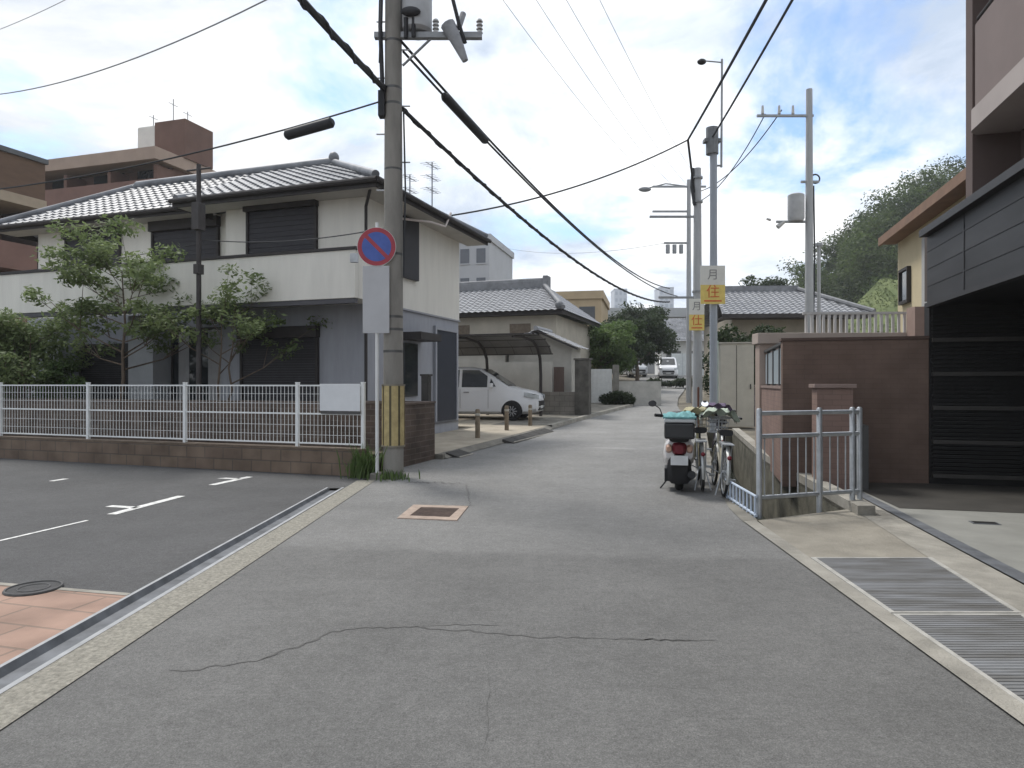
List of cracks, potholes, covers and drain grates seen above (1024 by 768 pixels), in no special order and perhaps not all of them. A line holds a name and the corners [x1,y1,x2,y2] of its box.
drain grate [892,613,1024,704]
drain grate [810,557,1022,614]
crack [175,624,716,671]
manhole cover [397,505,469,521]
manhole cover [2,580,64,597]
